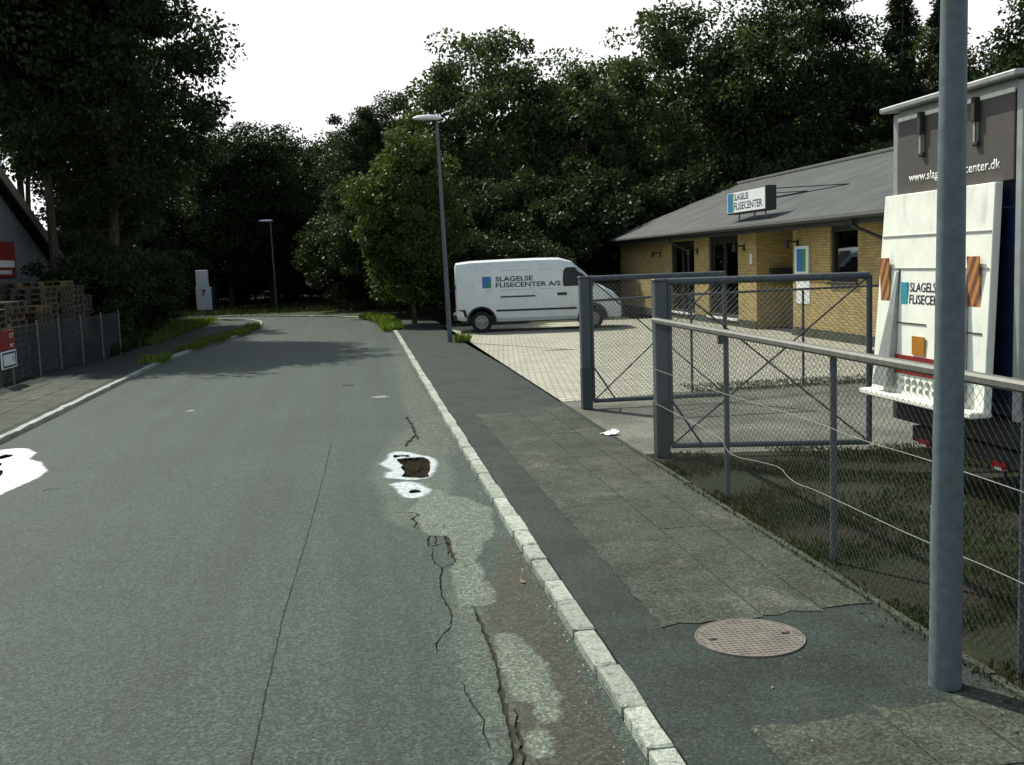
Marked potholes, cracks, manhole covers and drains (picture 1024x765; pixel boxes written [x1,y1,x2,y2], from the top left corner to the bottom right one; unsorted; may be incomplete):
crack [399,512,456,652]
pothole [397,457,430,478]
manhole cover [695,618,806,658]
crack [405,417,419,447]
crack [463,606,527,765]
crack [250,444,332,765]
